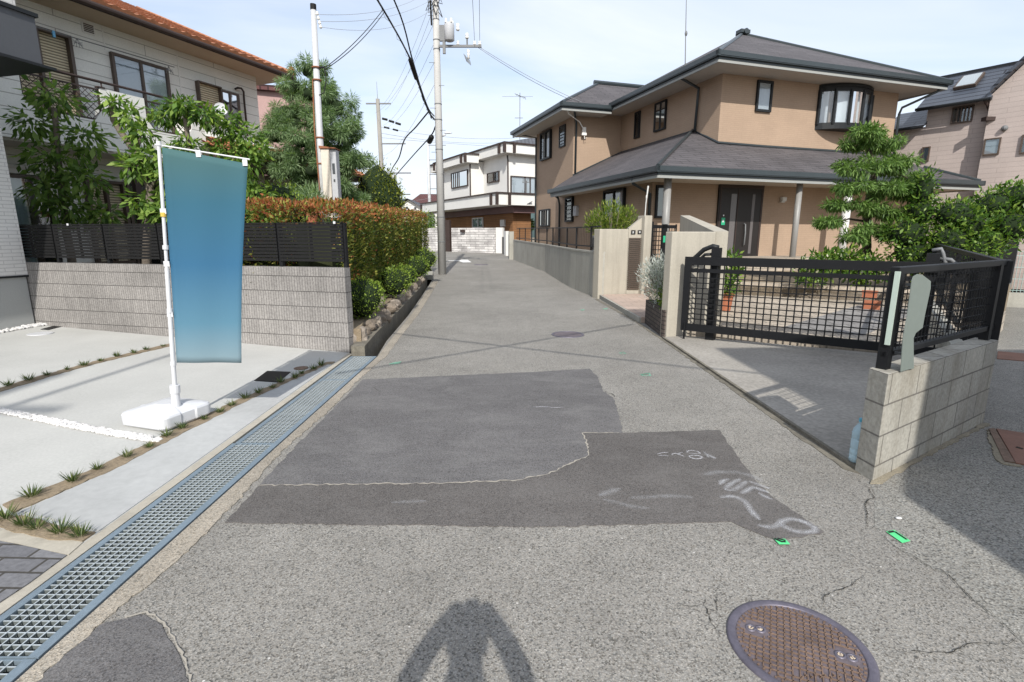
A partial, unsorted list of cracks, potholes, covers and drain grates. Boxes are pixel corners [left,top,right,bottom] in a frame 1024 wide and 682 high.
crack [878,639,1015,655]
drain grate [0,659,37,682]
drain grate [236,380,350,444]
drain grate [0,443,279,661]
drain grate [320,356,377,381]
manhole cover [726,600,880,682]
